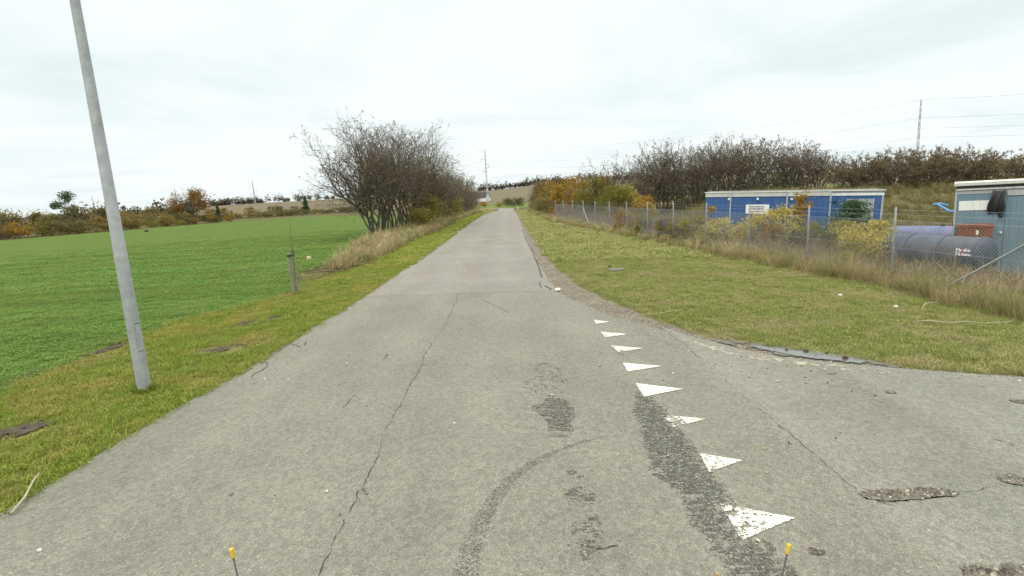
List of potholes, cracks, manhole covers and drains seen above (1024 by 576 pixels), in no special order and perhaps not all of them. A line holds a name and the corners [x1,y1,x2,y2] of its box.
pothole [997,473,1024,486]
pothole [960,563,1024,576]
crack [318,293,457,576]
pothole [859,487,960,501]
